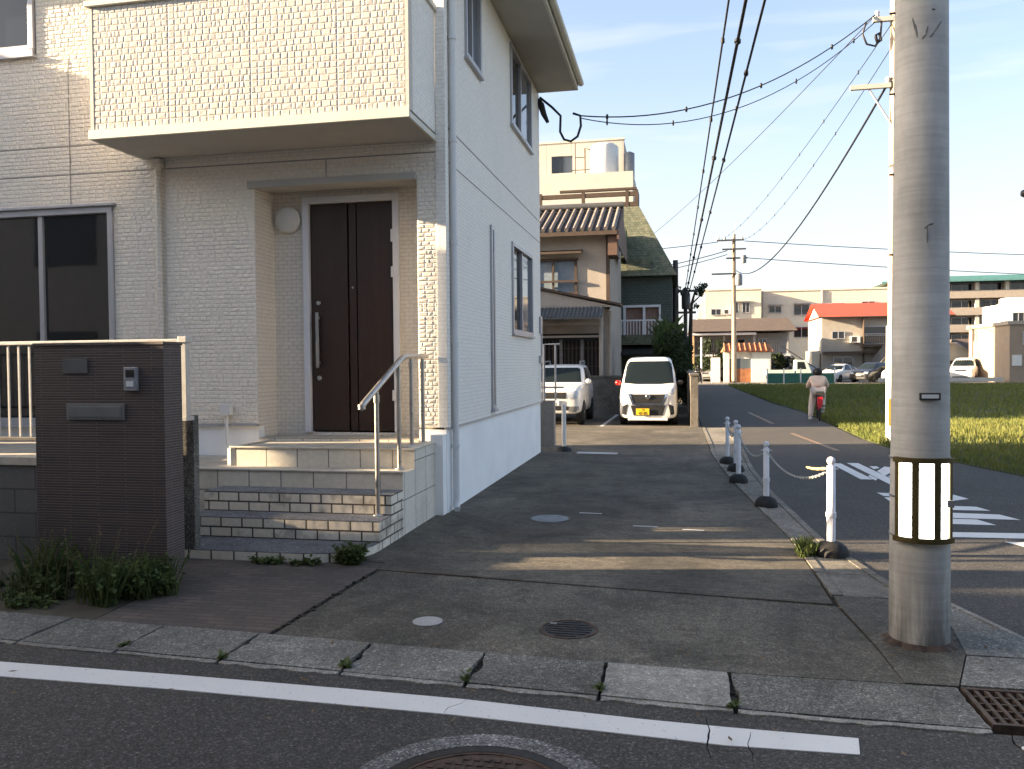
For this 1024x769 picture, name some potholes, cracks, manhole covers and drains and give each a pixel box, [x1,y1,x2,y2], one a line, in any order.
drain grate [960,687,1024,737]
crack [270,570,378,634]
manhole cover [358,734,599,769]
